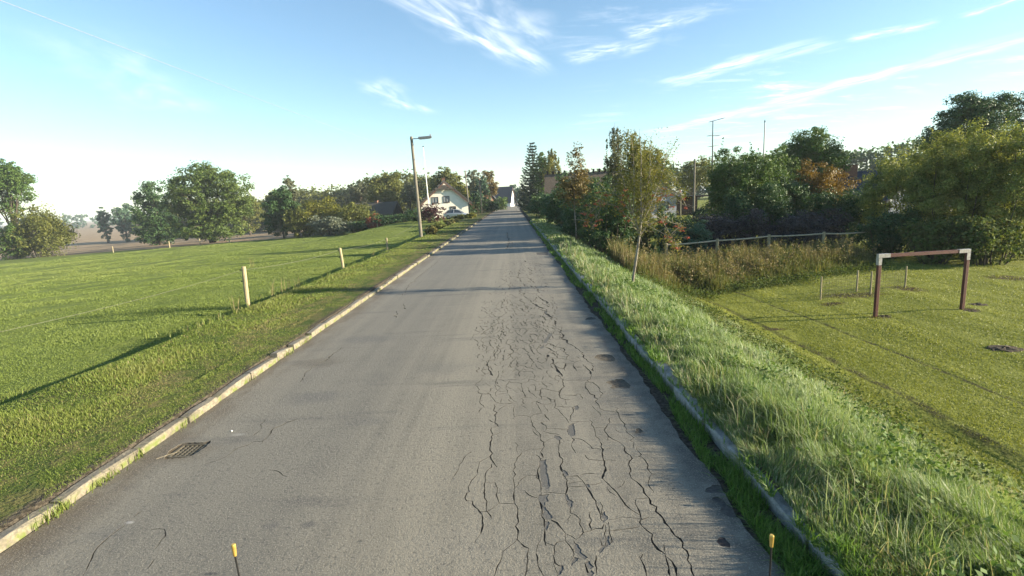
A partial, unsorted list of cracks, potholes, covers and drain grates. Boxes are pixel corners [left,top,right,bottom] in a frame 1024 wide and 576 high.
pothole [606,379,630,389]
crack [207,419,297,464]
crack [453,261,694,576]
pothole [705,485,725,494]
pothole [595,354,615,362]
drain grate [164,440,211,459]
crack [83,510,166,575]
